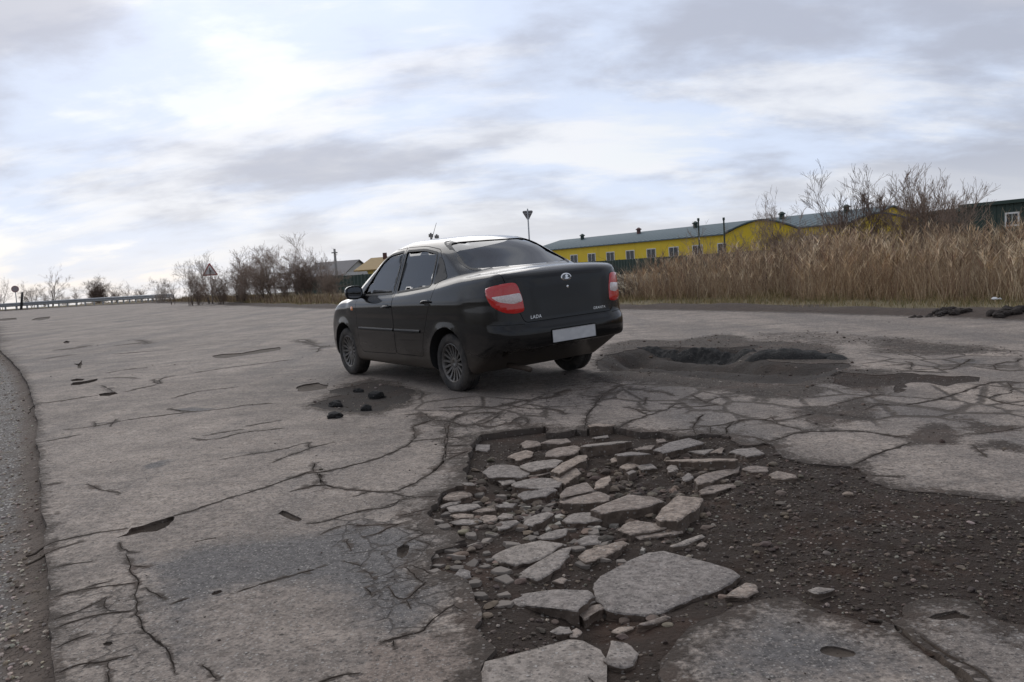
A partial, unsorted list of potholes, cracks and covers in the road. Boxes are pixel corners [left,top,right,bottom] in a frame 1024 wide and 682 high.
crack [584,386,911,477]
pothole [296,383,328,392]
crack [832,358,1024,457]
crack [28,340,287,443]
pothole [116,516,175,538]
pothole [427,426,1024,682]
crack [54,597,131,682]
crack [26,390,565,647]
pothole [310,382,415,412]
pothole [595,346,851,384]
